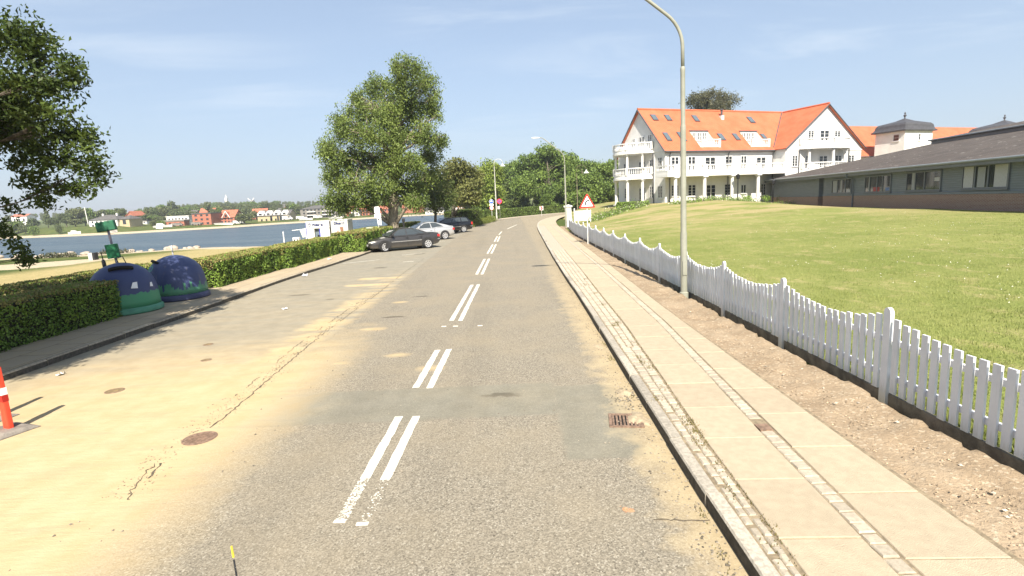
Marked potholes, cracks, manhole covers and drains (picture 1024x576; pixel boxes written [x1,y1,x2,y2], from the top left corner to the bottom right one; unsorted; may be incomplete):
manhole cover [181,431,218,446]
drain grate [608,413,645,428]
